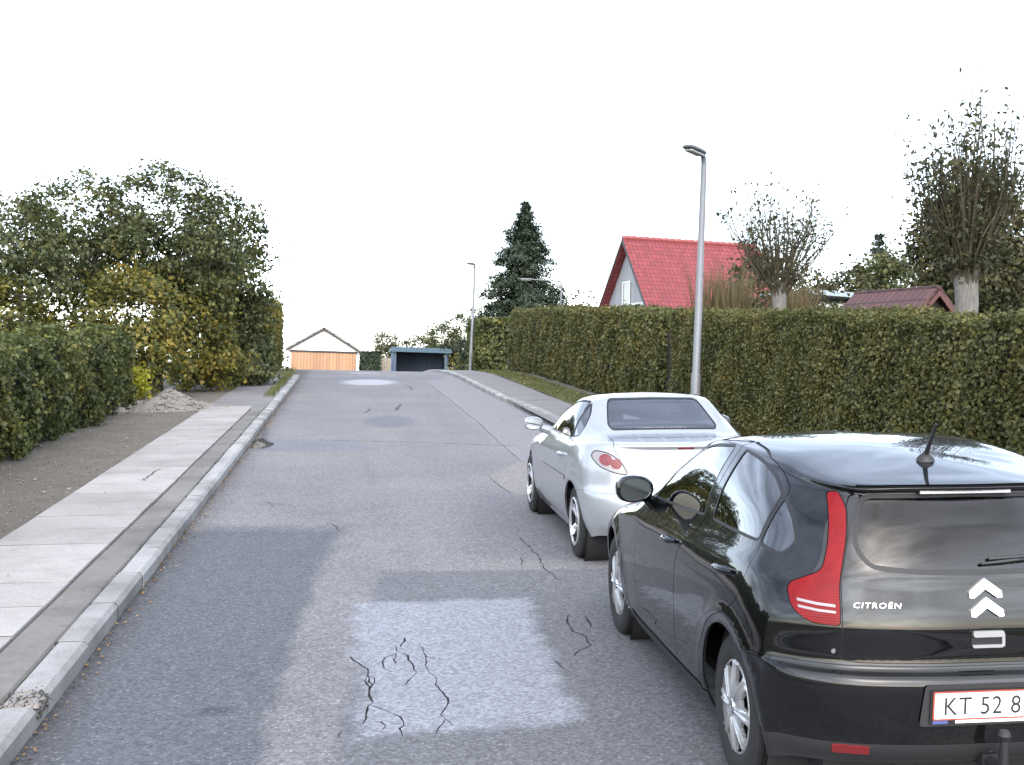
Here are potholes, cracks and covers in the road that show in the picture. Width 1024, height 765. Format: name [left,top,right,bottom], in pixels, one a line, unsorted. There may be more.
crack [519,536,561,581]
pothole [250,438,274,449]
crack [338,638,454,738]
crack [554,614,595,670]
